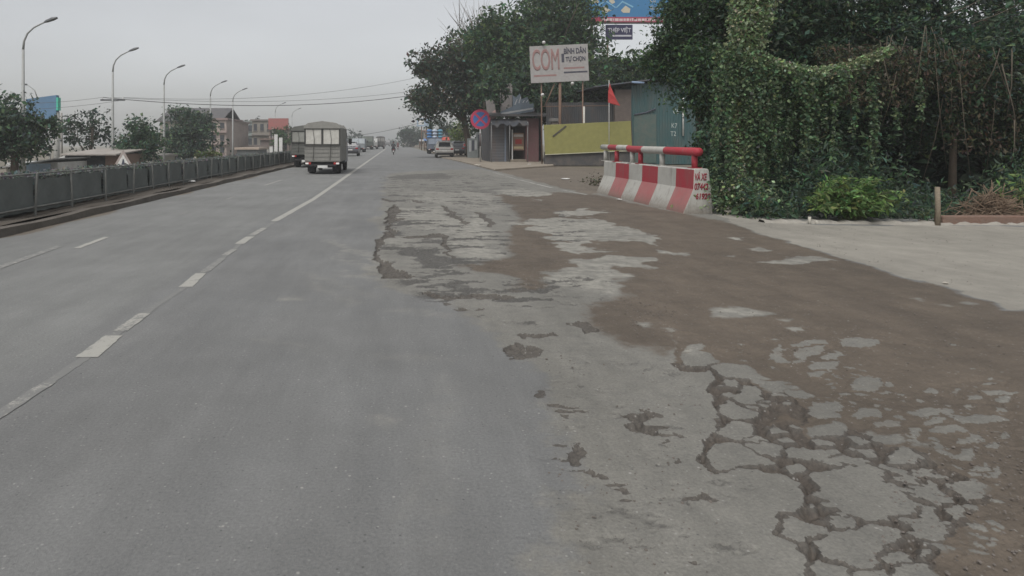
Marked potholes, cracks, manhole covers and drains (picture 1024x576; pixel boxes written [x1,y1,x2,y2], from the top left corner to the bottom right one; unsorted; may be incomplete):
crack [670,362,991,576]
pothole [620,409,687,444]
pothole [551,442,609,480]
pothole [503,342,544,360]
crack [372,198,496,279]
